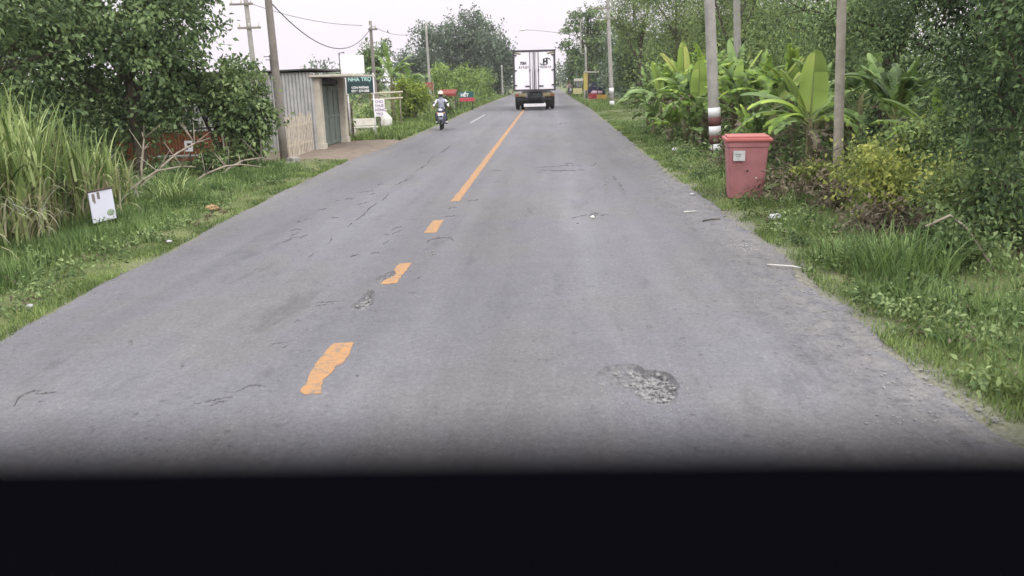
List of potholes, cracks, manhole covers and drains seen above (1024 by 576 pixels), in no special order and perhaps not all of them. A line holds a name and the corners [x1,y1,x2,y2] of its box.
pothole [373,271,396,282]
crack [284,146,450,257]
crack [539,163,576,172]
crack [13,390,55,407]
pothole [350,289,375,310]
pothole [594,363,680,404]
crack [195,384,266,406]
